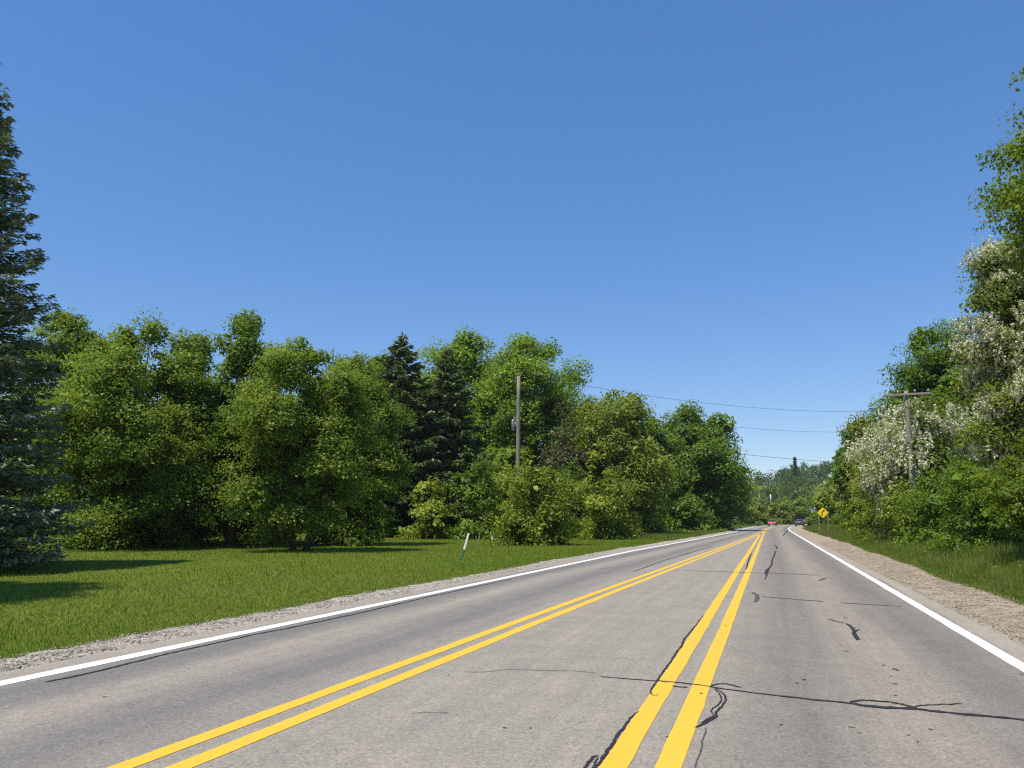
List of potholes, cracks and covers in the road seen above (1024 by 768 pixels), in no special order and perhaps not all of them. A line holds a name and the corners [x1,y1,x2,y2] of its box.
crack [718,553,826,581]
crack [752,592,816,602]
crack [464,616,1024,768]
